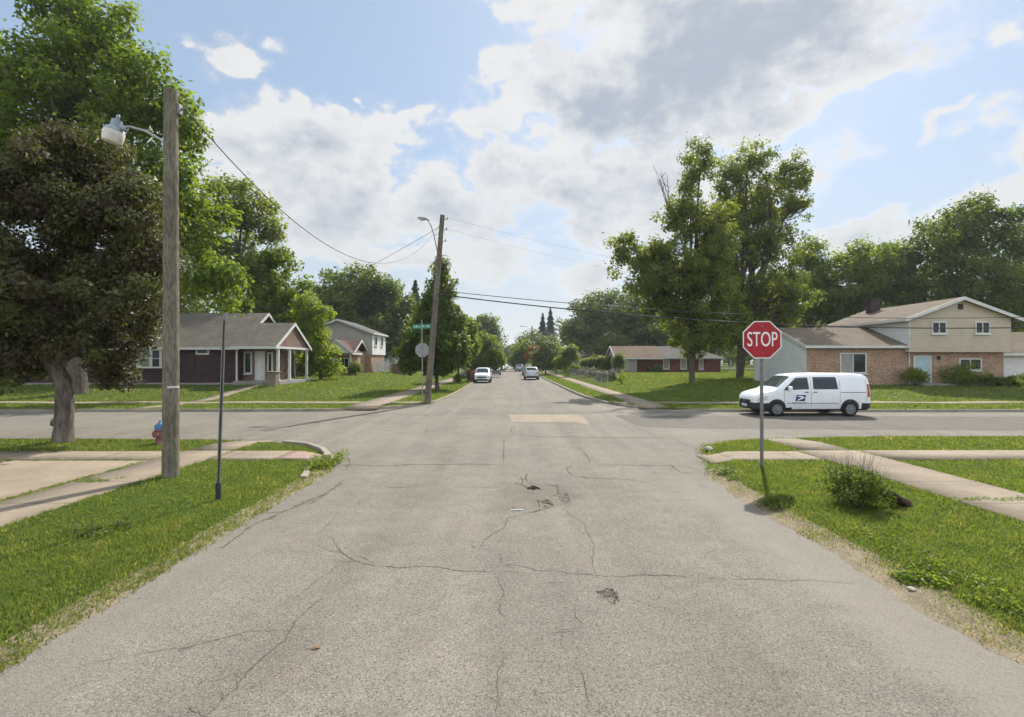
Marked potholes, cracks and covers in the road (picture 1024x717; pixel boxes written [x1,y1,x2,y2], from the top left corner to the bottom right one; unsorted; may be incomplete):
pothole [535,499,554,509]
crack [554,604,592,707]
pothole [596,587,619,605]
pothole [553,492,571,503]
crack [218,449,842,618]
